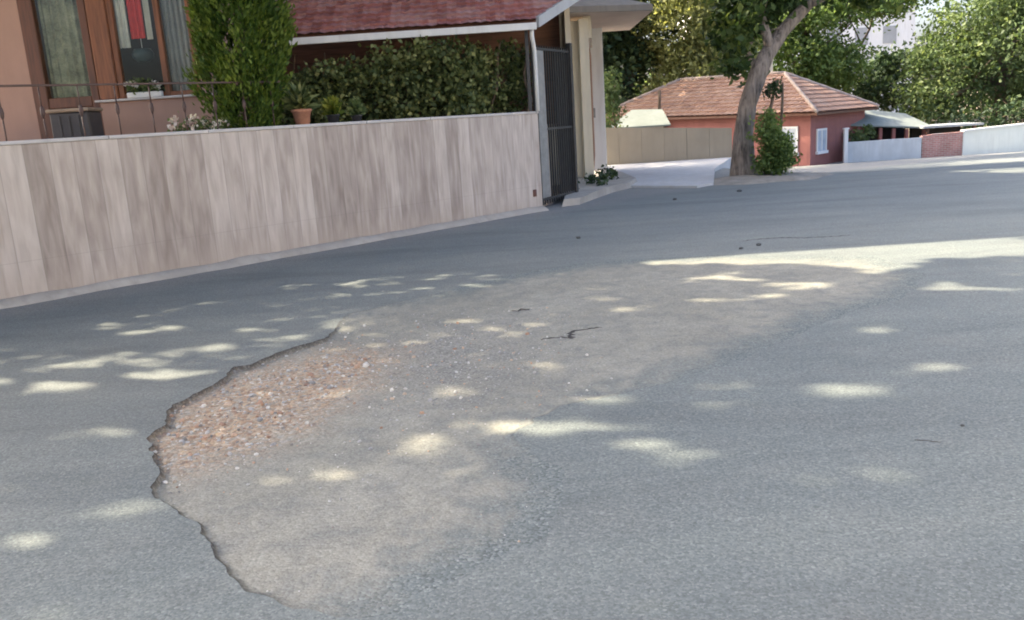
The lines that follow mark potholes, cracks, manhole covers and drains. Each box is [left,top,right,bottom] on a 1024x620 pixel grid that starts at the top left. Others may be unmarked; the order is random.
pothole [146,255,927,619]
